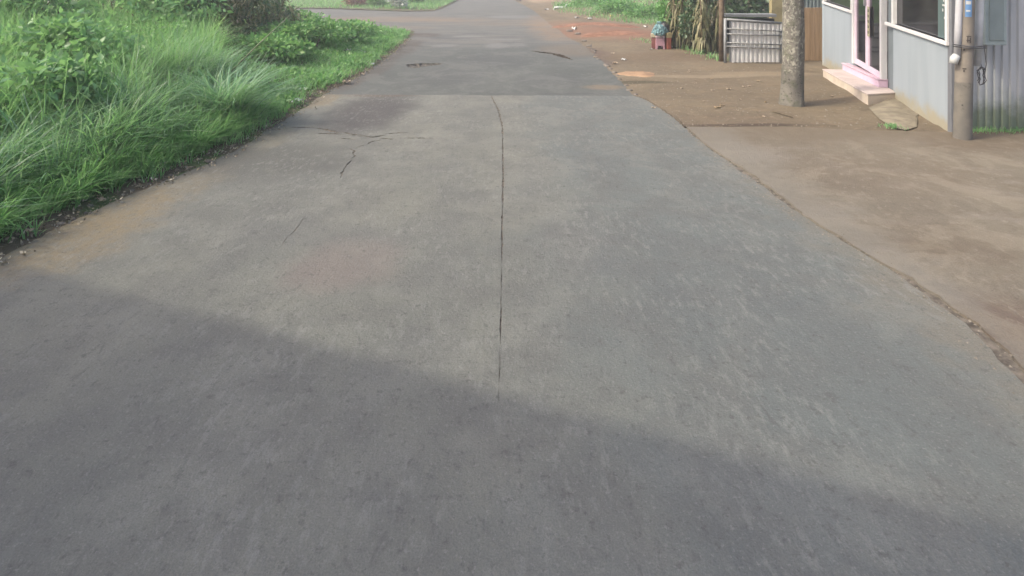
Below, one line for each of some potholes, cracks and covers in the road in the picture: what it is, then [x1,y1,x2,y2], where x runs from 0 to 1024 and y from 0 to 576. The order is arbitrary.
crack [534,51,573,60]
crack [296,127,460,185]
